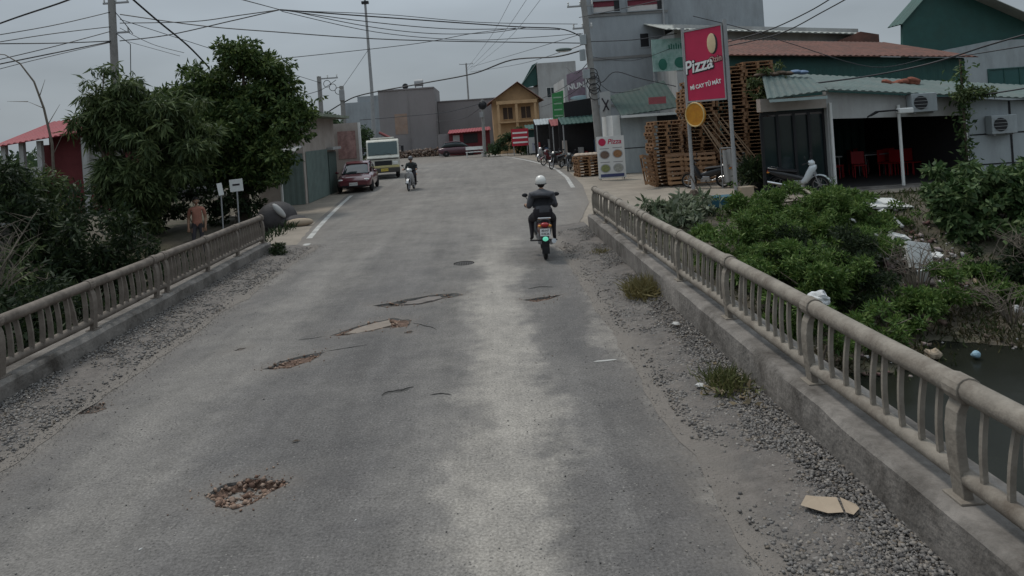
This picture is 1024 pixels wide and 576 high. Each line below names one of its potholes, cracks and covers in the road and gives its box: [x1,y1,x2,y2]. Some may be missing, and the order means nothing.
pothole [204,475,290,509]
pothole [330,318,412,336]
crack [382,387,413,396]
pothole [263,352,324,370]
pothole [374,293,462,308]
pothole [78,402,107,414]
